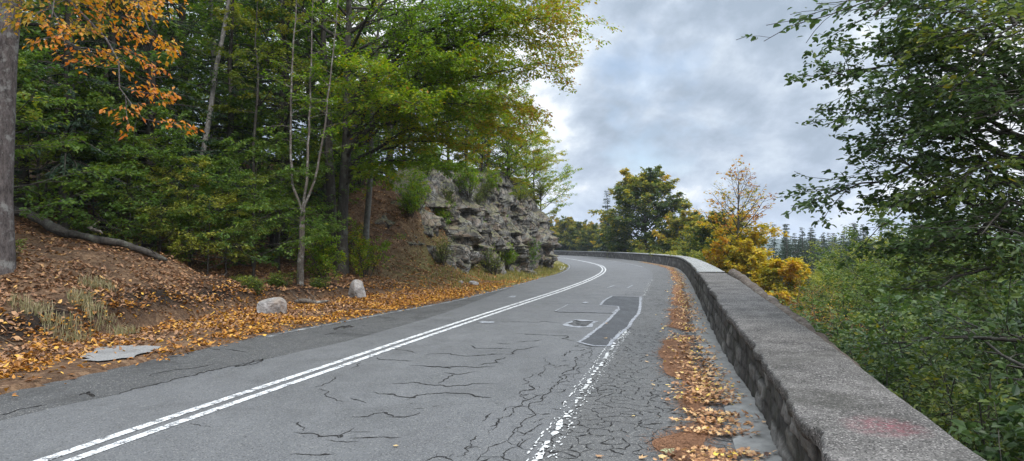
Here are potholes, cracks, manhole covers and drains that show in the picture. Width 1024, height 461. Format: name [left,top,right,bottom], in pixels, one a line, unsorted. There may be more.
crack [295,271,731,461]
